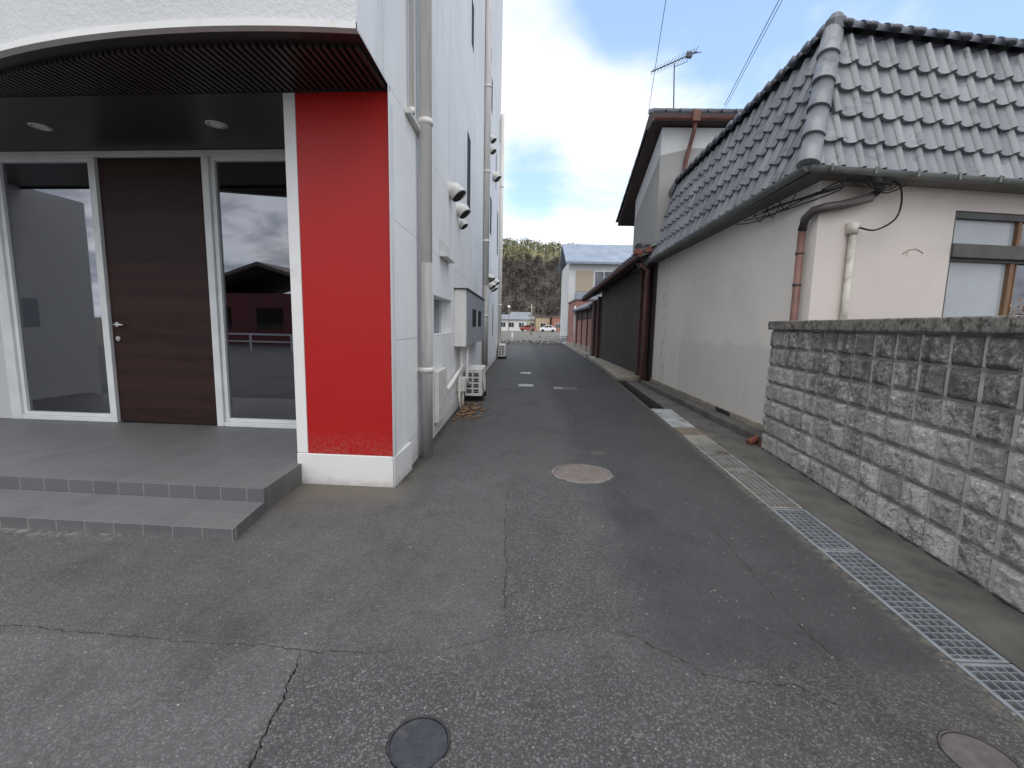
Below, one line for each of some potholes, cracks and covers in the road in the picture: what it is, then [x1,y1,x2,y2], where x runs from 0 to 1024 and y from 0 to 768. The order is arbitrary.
drain grate [723,469,804,510]
crack [440,624,854,709]
drain grate [694,445,751,470]
manhole cover [385,714,451,768]
manhole cover [549,463,615,484]
manhole cover [936,729,1022,768]
drain grate [820,550,1010,664]
drain grate [771,509,860,551]
drain grate [955,662,1024,721]
